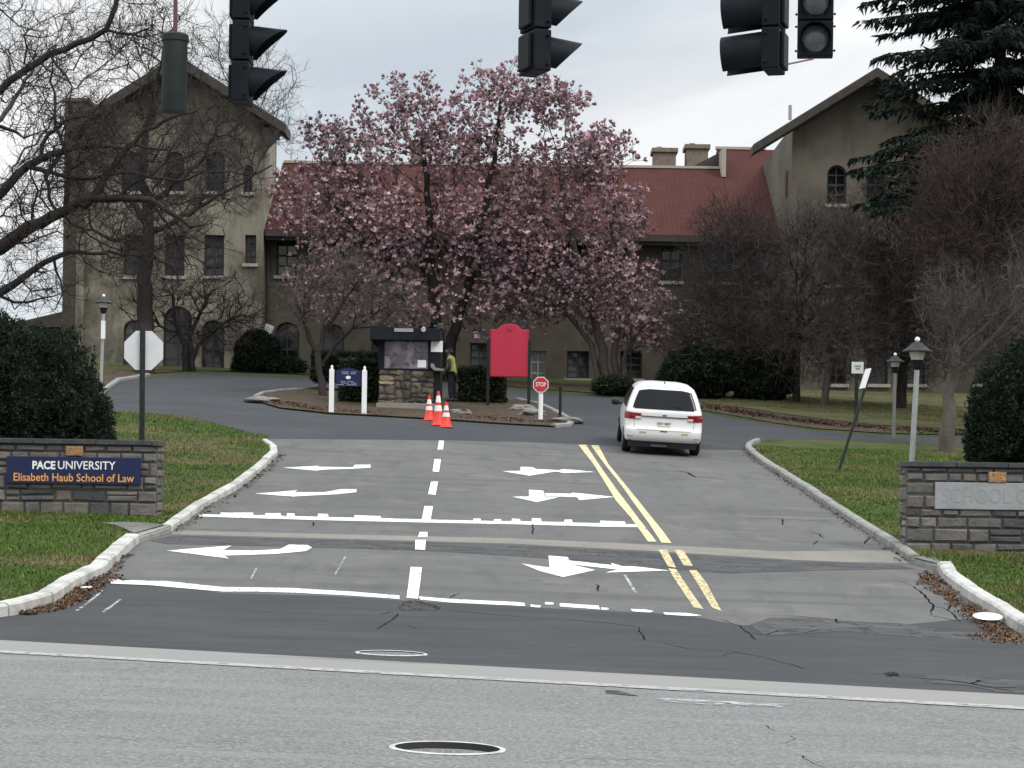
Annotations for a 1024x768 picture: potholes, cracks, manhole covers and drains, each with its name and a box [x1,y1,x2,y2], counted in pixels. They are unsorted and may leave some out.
crack [899,581,981,637]
manhole cover [389,741,506,755]
pothole [398,600,442,611]
crack [763,518,841,545]
crack [369,612,418,630]
crack [449,593,1015,692]
